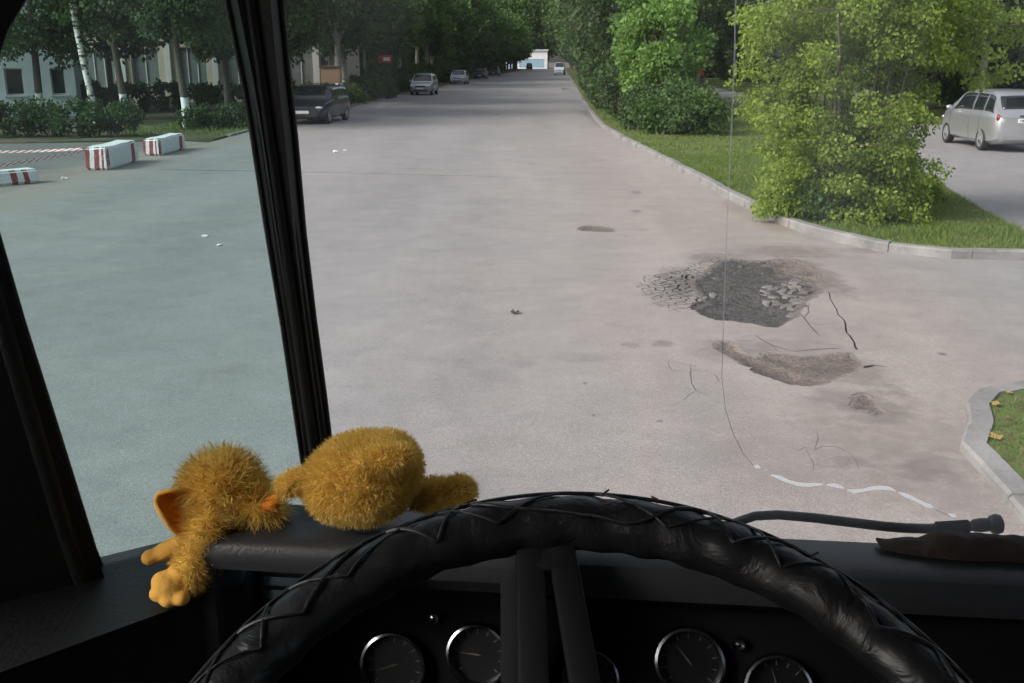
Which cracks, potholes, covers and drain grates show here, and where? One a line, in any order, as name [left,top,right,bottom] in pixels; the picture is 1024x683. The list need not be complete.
pothole [712,340,866,387]
crack [668,360,719,398]
pothole [848,392,891,417]
crack [755,292,886,368]
pothole [689,258,827,328]
